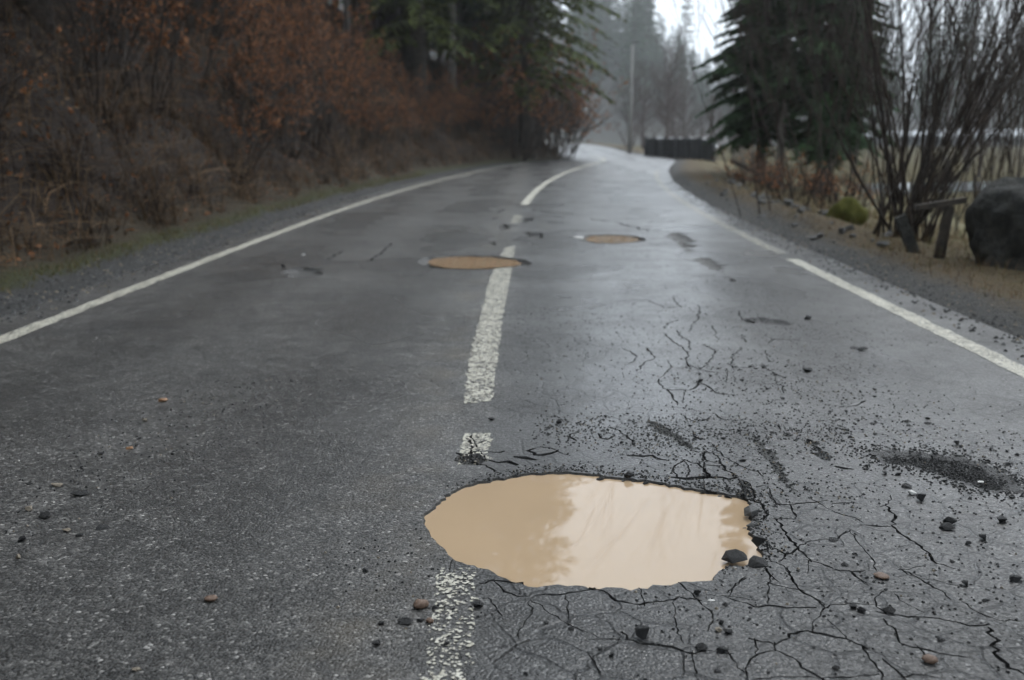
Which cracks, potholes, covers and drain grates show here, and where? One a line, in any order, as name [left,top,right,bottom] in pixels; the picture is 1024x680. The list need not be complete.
pothole [868,449,1024,494]
pothole [418,255,533,270]
pothole [423,472,763,590]
crack [479,296,1024,680]
pothole [579,234,646,244]
crack [456,431,580,473]
pothole [690,258,729,272]
pothole [664,233,702,252]
